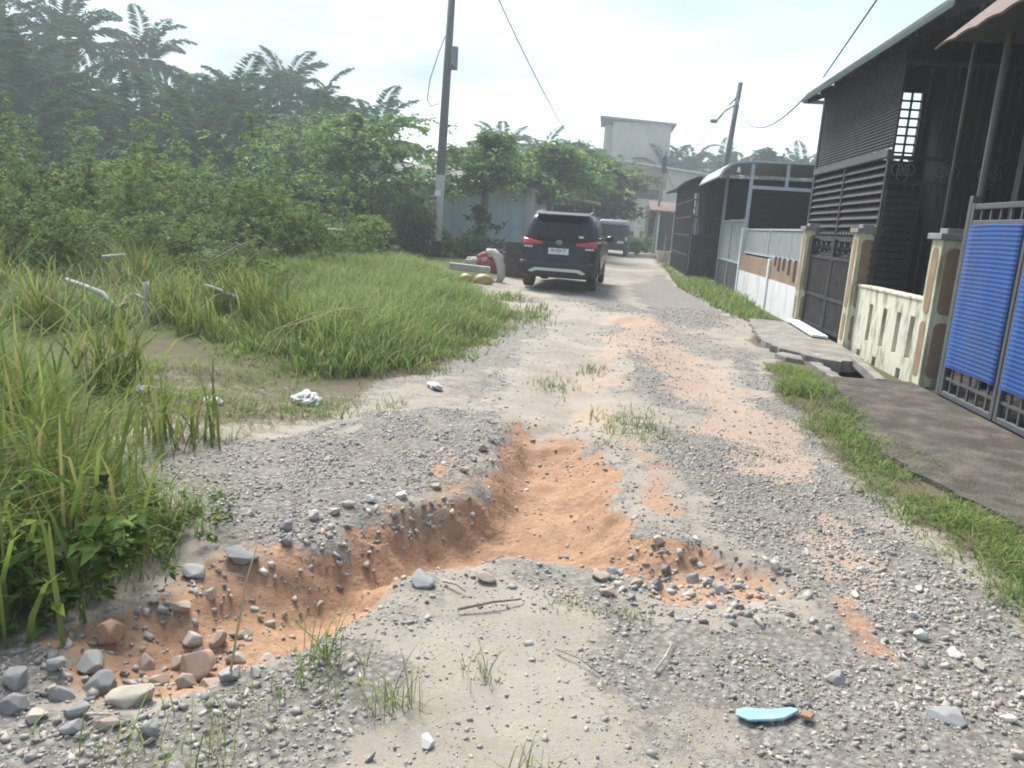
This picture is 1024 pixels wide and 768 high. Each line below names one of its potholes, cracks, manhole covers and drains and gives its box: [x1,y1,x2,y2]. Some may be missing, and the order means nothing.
pothole [0,416,826,727]
